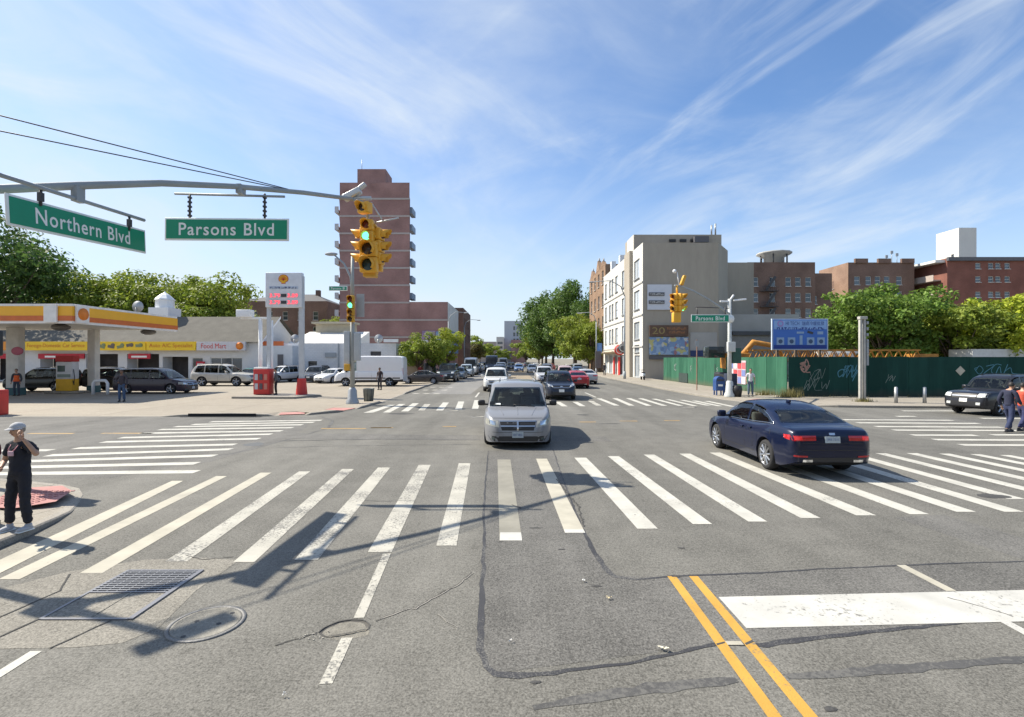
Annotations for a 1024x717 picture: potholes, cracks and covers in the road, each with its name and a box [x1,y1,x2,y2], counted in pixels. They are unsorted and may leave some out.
manhole cover [164,605,247,643]
crack [376,573,473,628]
drain grate [38,569,204,620]
